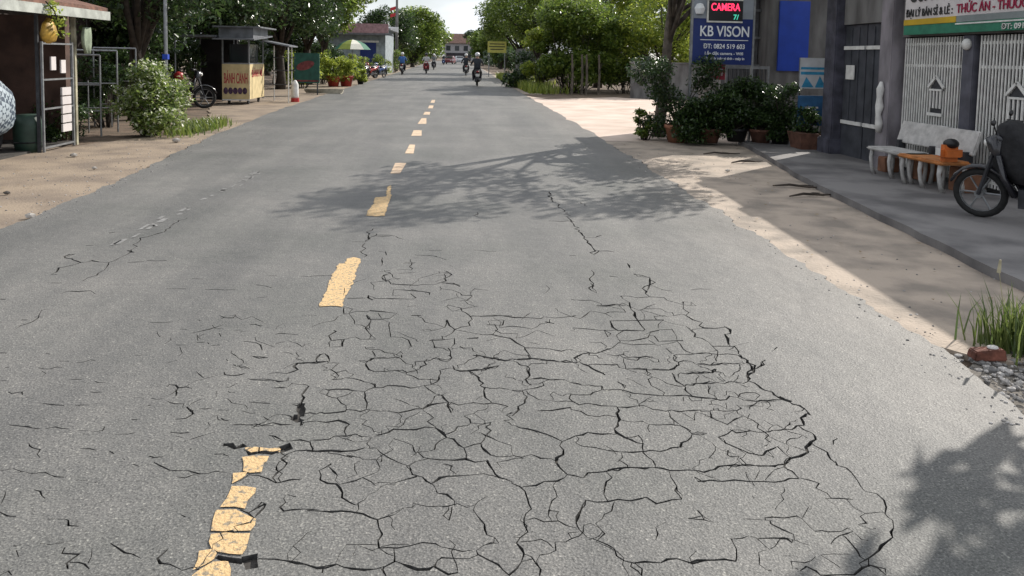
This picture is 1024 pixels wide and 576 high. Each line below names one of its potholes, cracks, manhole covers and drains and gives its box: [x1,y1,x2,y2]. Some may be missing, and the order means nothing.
crack [548,192,612,256]
crack [0,263,894,576]
crack [360,212,491,284]
